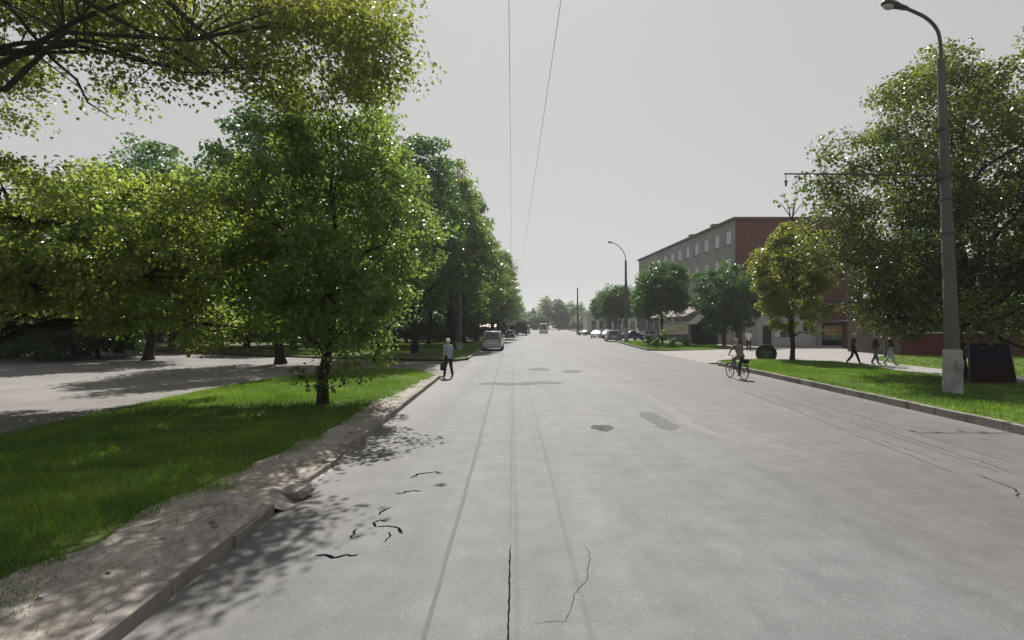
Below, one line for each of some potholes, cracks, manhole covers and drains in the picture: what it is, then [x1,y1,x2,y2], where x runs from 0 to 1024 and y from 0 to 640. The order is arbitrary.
crack [839,419,1020,497]
crack [315,471,441,559]
crack [538,546,591,624]
